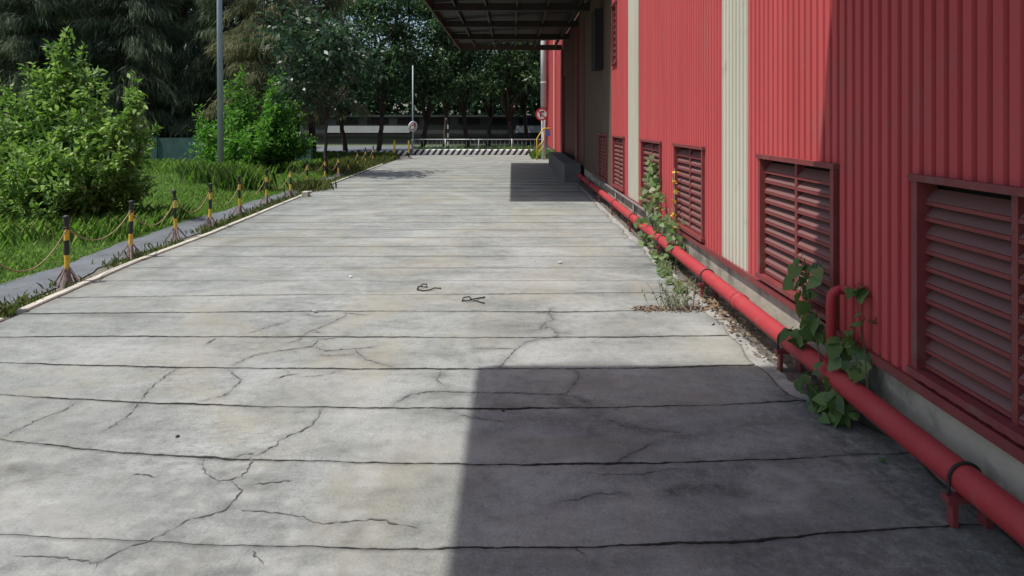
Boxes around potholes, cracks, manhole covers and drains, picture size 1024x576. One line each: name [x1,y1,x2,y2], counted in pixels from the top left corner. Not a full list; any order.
crack [23,409,417,565]
crack [201,313,363,401]
crack [486,309,559,365]
crack [392,371,702,475]
